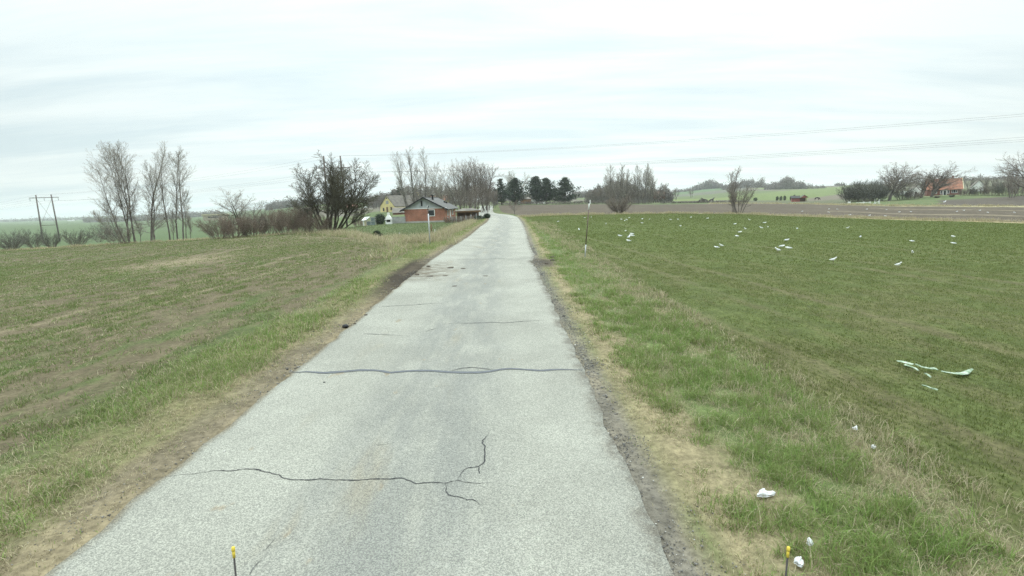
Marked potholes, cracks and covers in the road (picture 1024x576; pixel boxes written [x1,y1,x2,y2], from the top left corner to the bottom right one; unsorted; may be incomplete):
crack [155,437,517,505]
